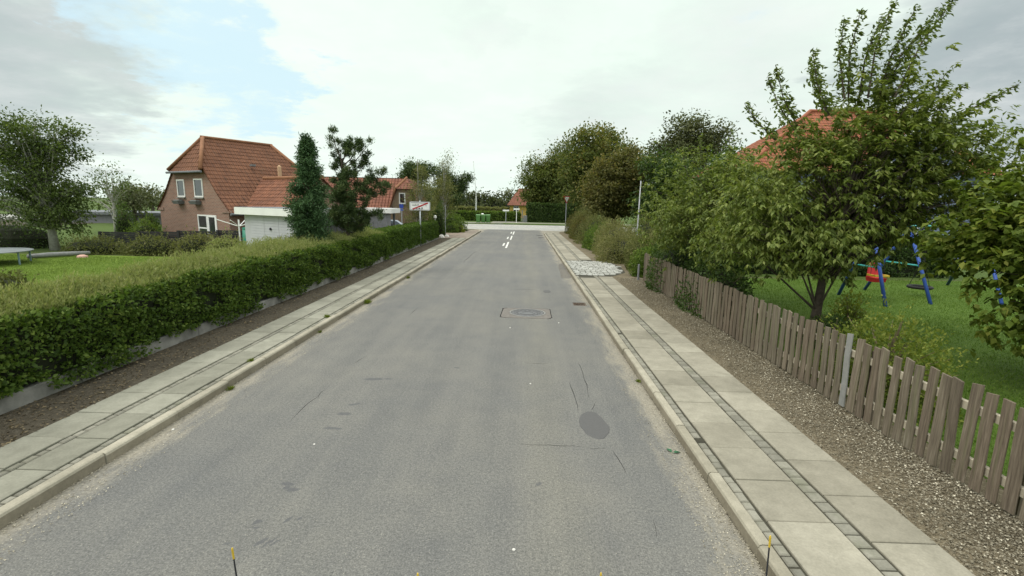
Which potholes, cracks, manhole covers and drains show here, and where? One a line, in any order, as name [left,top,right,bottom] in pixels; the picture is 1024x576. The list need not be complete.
manhole cover [500,308,552,319]
